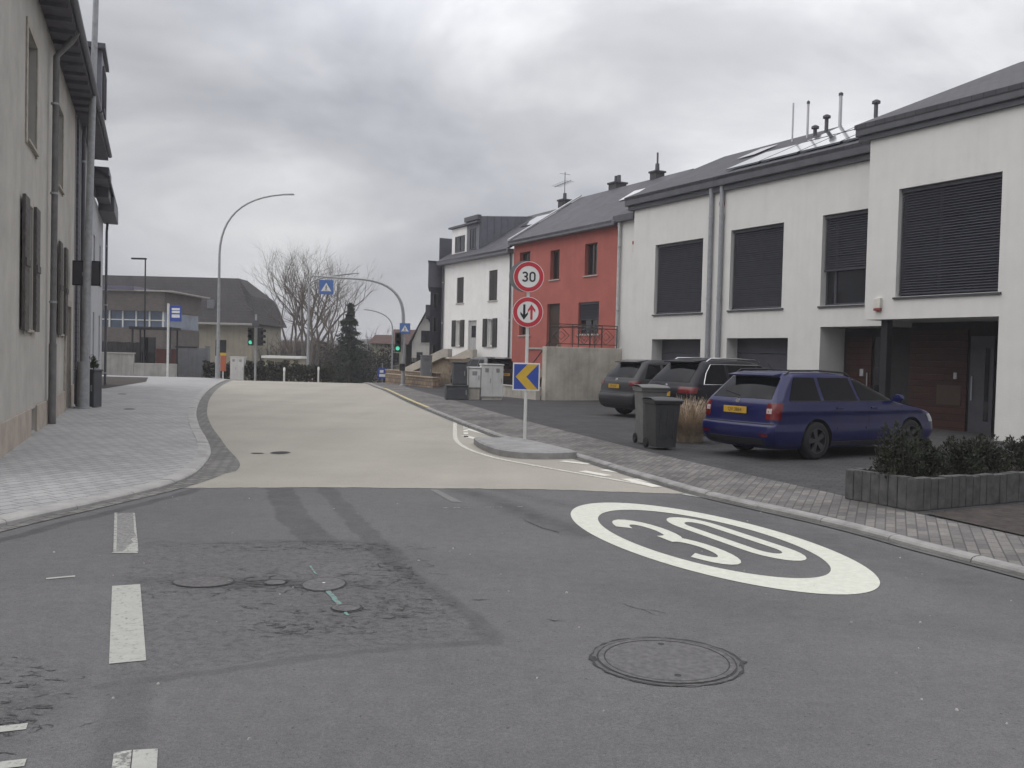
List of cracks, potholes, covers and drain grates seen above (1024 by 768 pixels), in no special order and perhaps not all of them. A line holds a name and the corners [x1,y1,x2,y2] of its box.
crack [0,657,96,754]
manhole cover [172,575,235,588]
manhole cover [301,577,347,591]
utility cover [330,603,364,613]
manhole cover [588,637,748,687]
